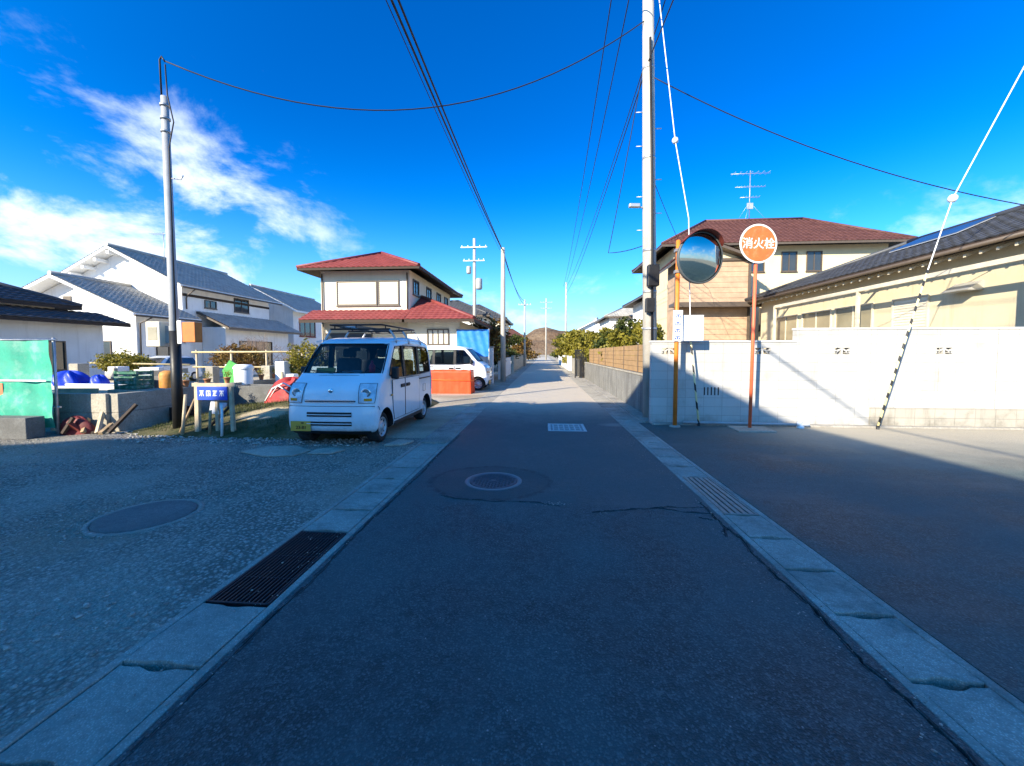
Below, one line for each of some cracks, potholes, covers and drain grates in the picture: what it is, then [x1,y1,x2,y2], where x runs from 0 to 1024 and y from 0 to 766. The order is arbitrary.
crack [592,502,981,766]
manhole cover [80,499,204,537]
drain grate [682,477,758,517]
drain grate [206,531,346,608]
manhole cover [465,472,522,491]
